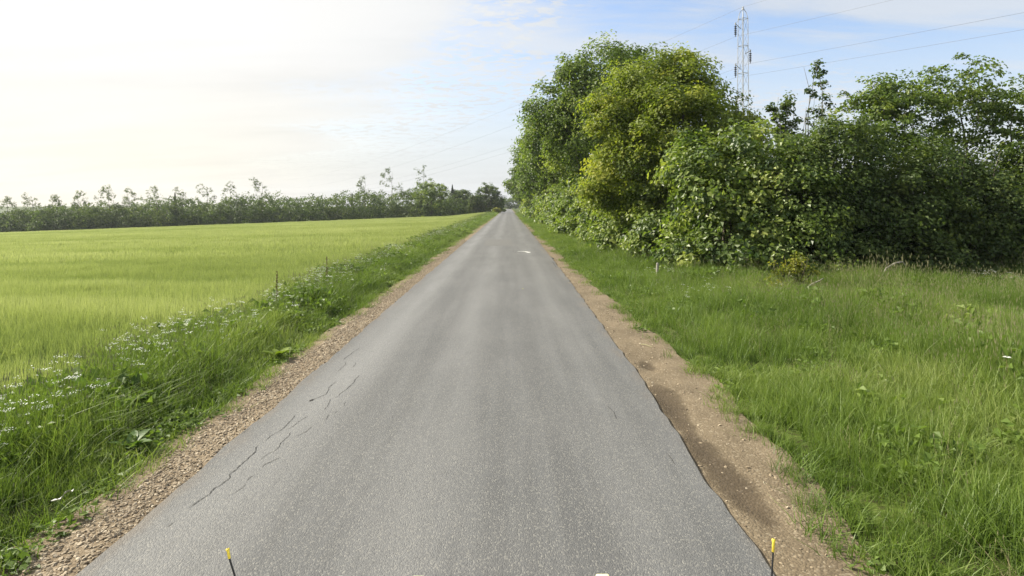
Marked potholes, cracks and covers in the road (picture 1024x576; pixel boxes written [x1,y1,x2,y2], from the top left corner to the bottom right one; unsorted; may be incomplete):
crack [190,348,359,507]
